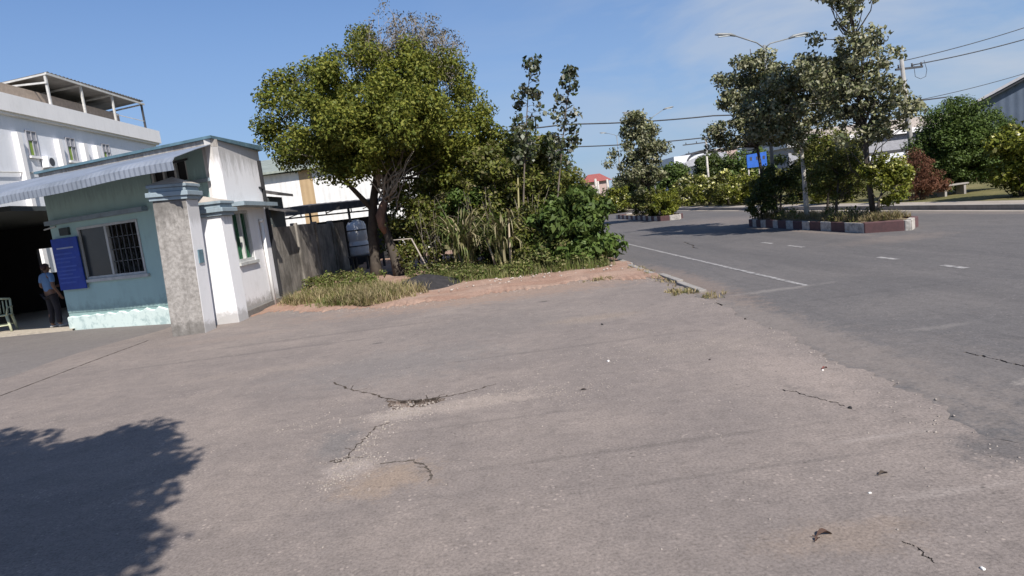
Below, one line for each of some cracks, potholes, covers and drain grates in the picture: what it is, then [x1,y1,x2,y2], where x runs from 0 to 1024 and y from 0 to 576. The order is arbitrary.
pothole [387,398,445,410]
crack [329,422,390,463]
crack [333,382,495,404]
crack [964,352,1024,367]
crack [783,389,844,406]
crack [901,541,935,563]
crack [380,459,433,481]
